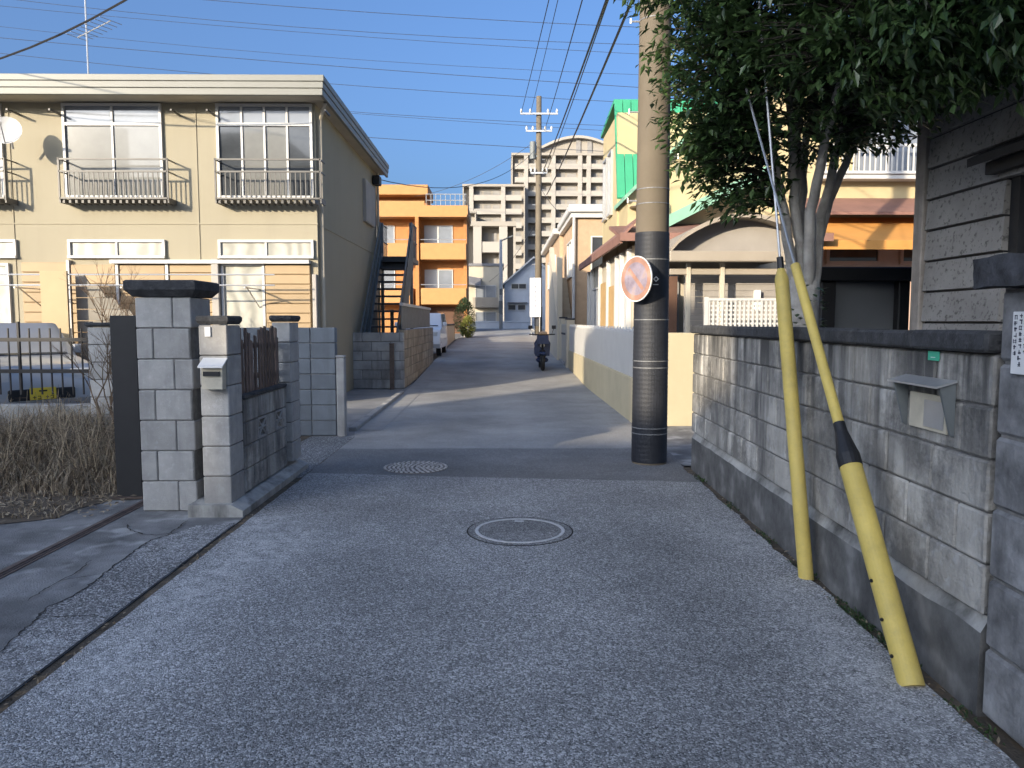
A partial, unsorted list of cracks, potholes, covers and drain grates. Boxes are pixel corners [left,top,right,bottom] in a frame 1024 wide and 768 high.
manhole cover [467,517,573,546]
crack [0,521,186,652]
manhole cover [383,461,448,474]
